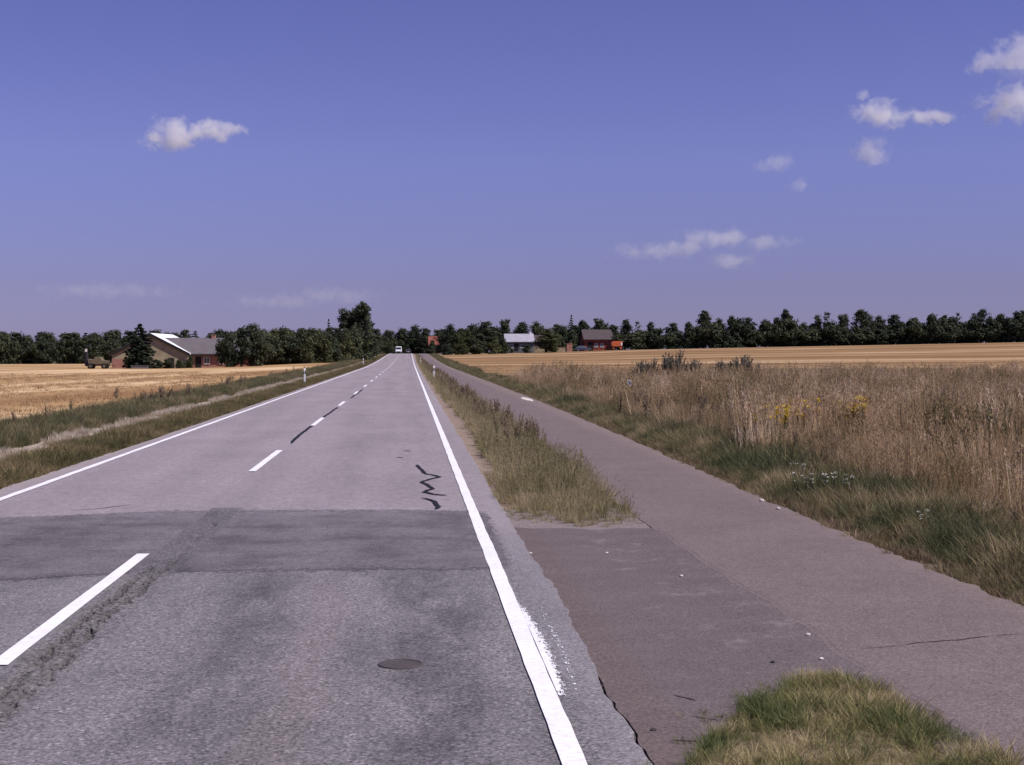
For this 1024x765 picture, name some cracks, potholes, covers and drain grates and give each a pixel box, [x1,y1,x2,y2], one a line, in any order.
crack [872,634,1008,648]
manhole cover [378,659,423,669]
